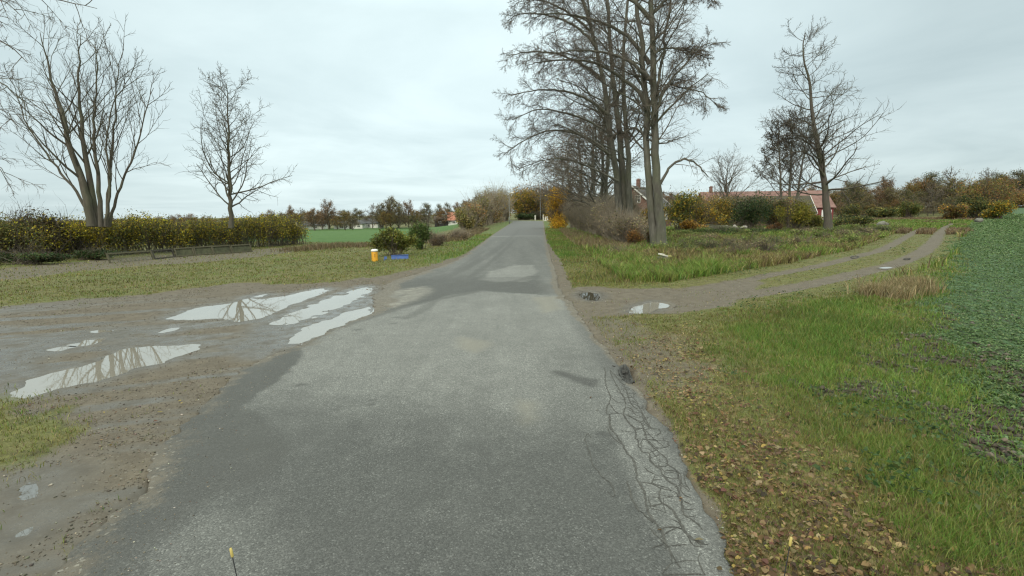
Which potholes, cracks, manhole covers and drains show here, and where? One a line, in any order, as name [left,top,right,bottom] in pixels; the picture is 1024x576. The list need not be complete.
crack [584,368,708,575]
pothole [579,292,600,301]
pothole [612,364,635,384]
